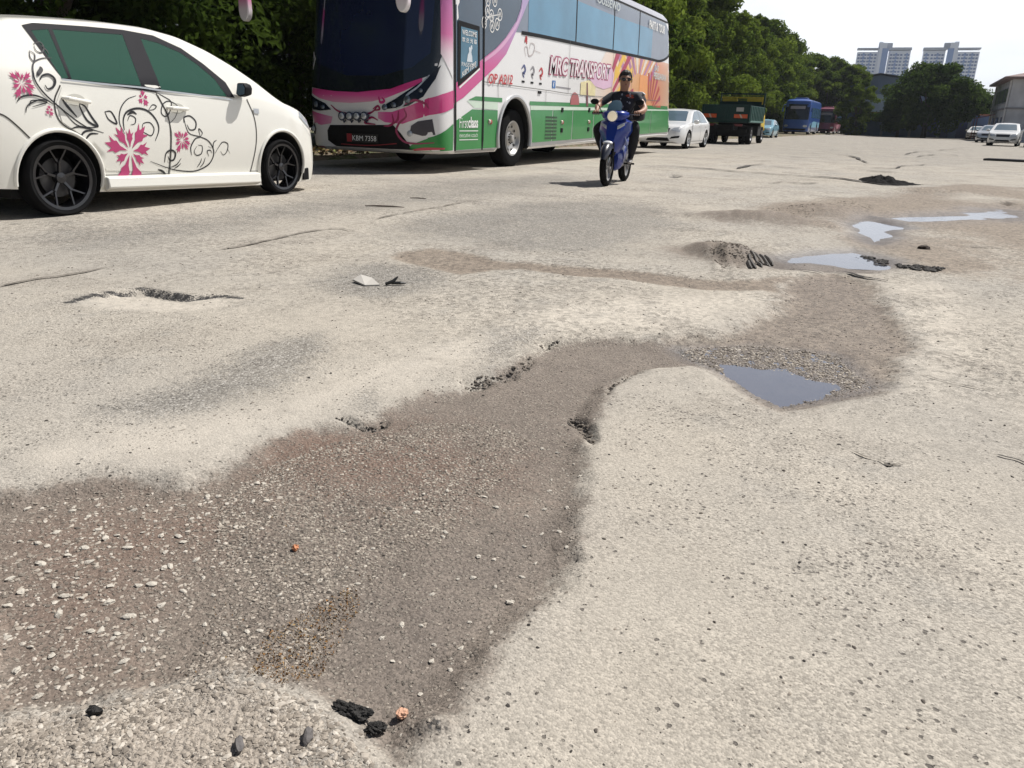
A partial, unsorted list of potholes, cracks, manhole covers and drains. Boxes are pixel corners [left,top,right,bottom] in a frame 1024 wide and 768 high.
pothole [756,252,903,274]
pothole [0,336,708,768]
pothole [845,216,920,249]
pothole [657,272,918,411]
crack [1,267,103,286]
crack [221,228,348,249]
pothole [886,205,1024,228]
pothole [70,287,242,312]
